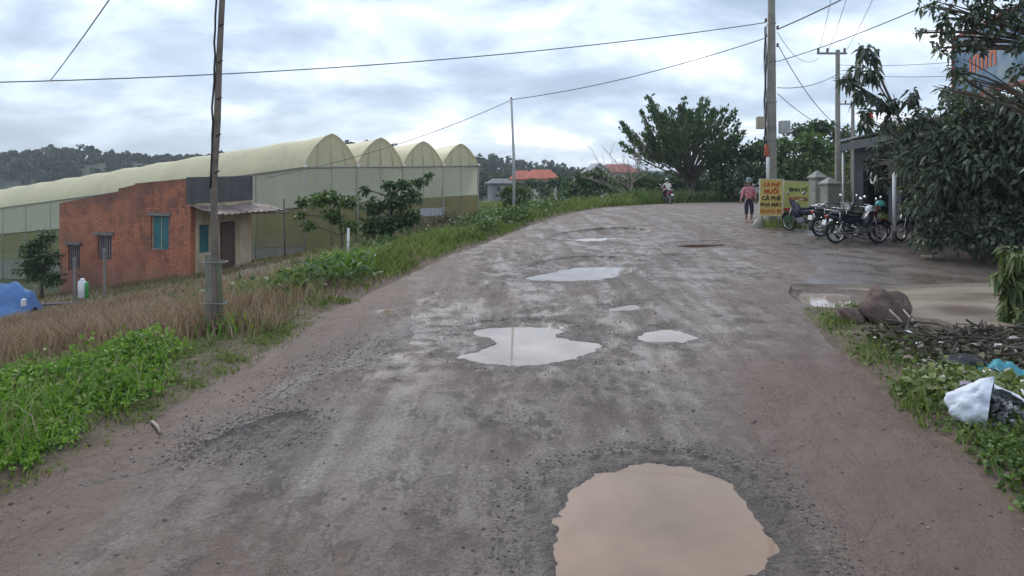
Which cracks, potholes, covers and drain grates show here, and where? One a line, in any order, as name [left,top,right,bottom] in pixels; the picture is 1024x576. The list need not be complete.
pothole [439,317,620,370]
pothole [602,299,651,314]
pothole [627,323,709,344]
pothole [788,288,869,308]
pothole [512,449,827,576]
pothole [510,255,650,284]
pothole [543,227,653,243]
pothole [187,411,315,460]
